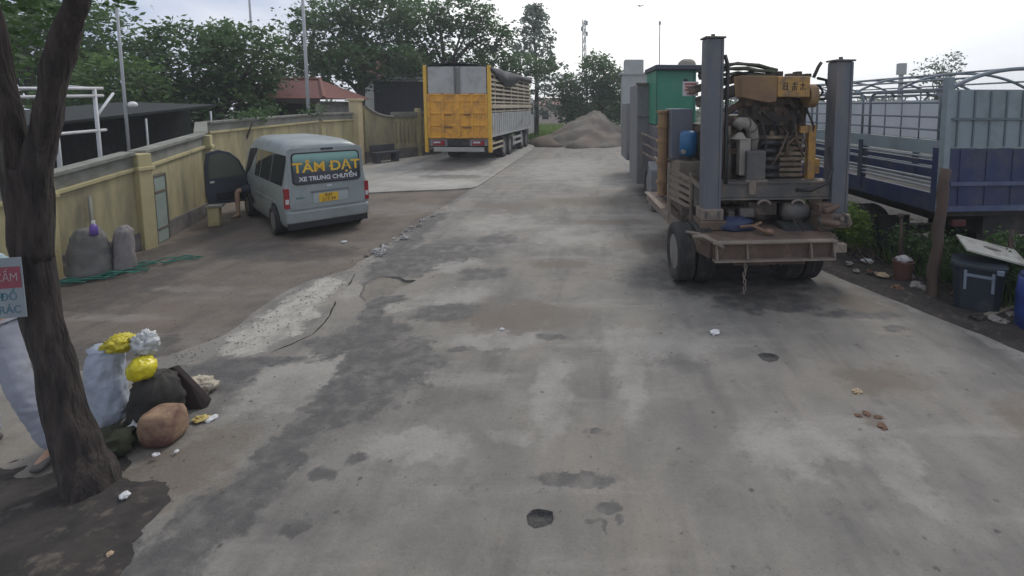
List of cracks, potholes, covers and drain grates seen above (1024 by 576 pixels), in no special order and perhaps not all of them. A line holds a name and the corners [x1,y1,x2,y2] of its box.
crack [273,275,354,352]
pothole [526,509,554,529]
pothole [757,353,780,362]
